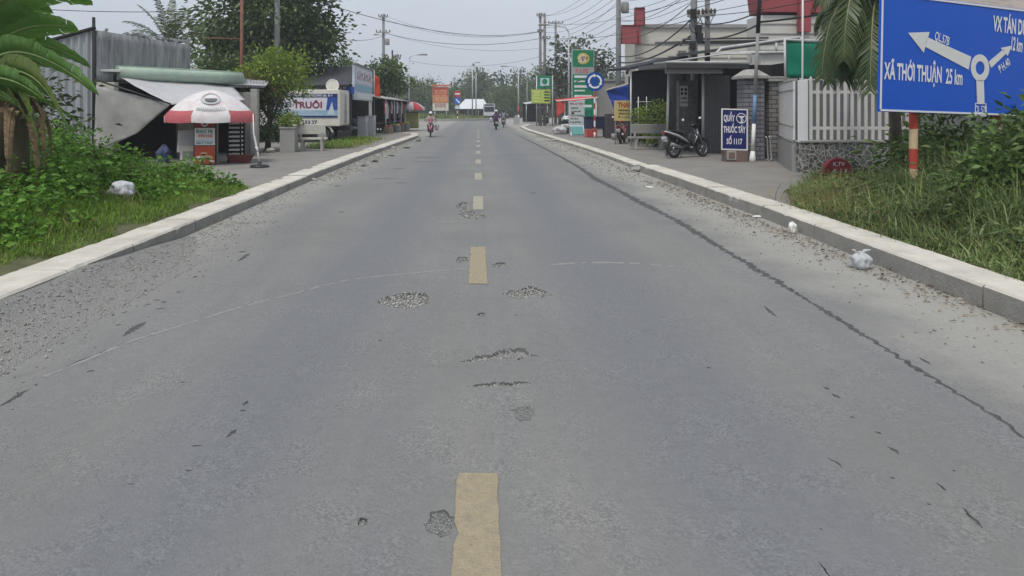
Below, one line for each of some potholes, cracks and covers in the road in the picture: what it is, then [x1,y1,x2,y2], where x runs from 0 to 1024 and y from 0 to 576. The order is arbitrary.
crack [1,389,29,406]
pothole [456,202,486,219]
crack [70,322,146,372]
pothole [460,347,539,362]
pothole [502,286,552,299]
pothole [377,292,429,309]
crack [963,508,983,528]
pothole [423,509,456,538]
